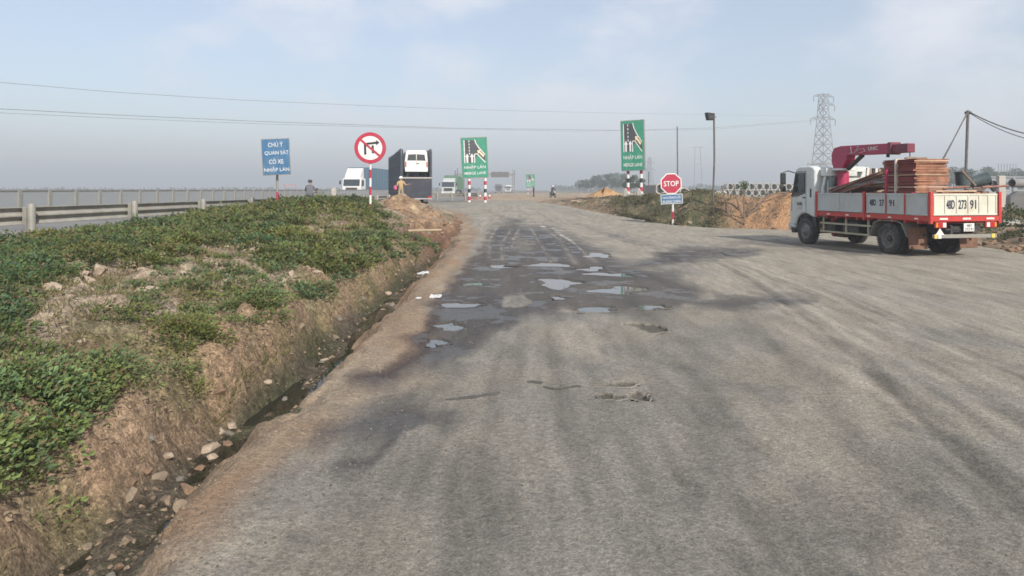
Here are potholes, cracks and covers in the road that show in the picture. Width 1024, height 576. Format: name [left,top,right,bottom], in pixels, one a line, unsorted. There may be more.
pothole [623,322,671,335]
pothole [594,392,629,402]
pothole [534,277,589,292]
pothole [426,320,468,332]
crack [446,391,501,400]
pothole [433,301,489,309]
pothole [559,304,621,314]
crack [527,380,581,390]
pothole [418,337,453,349]
pothole [624,391,653,403]
pothole [577,283,653,296]
